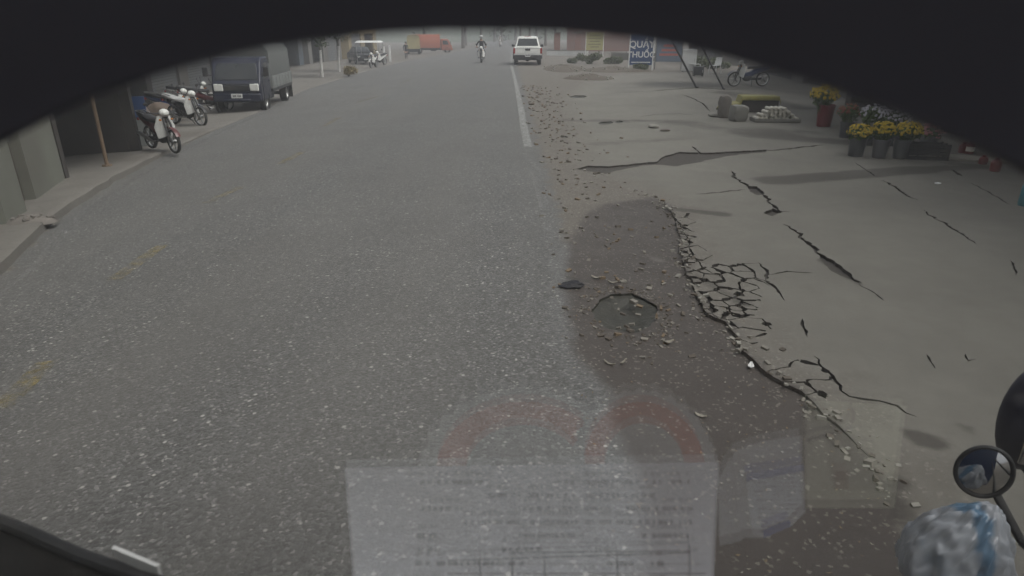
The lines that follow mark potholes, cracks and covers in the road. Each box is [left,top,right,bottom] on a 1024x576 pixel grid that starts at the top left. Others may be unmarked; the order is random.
crack [609,88,735,116]
pothole [591,293,658,333]
crack [578,145,883,344]
crack [767,355,935,417]
crack [855,162,975,243]
